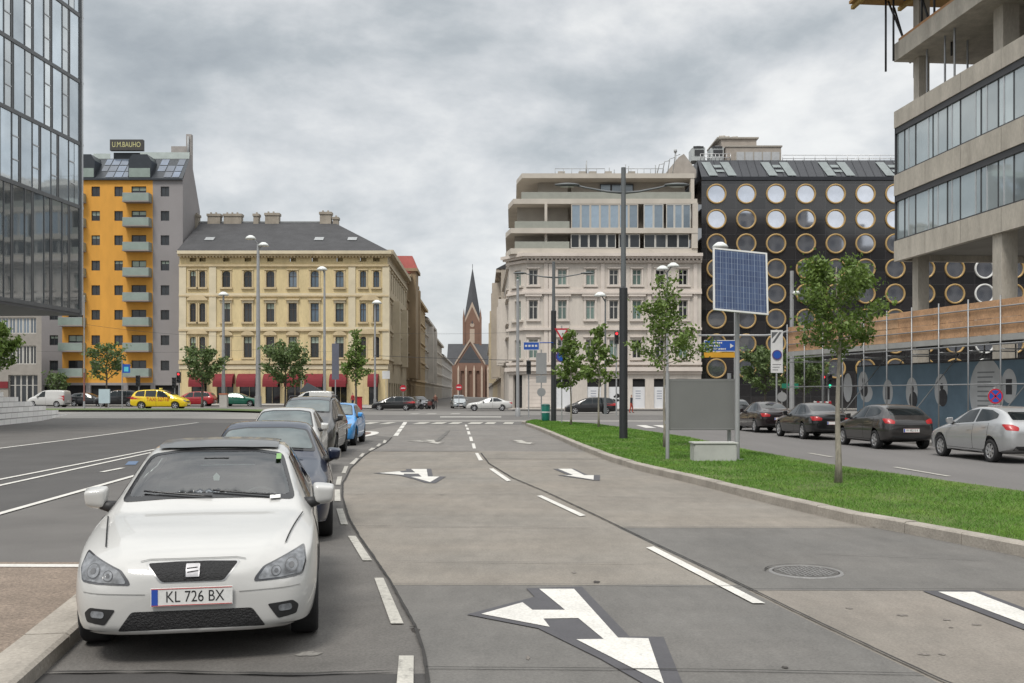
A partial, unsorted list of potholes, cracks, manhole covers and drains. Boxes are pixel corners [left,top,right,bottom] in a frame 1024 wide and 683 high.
manhole cover [768,565,844,579]
